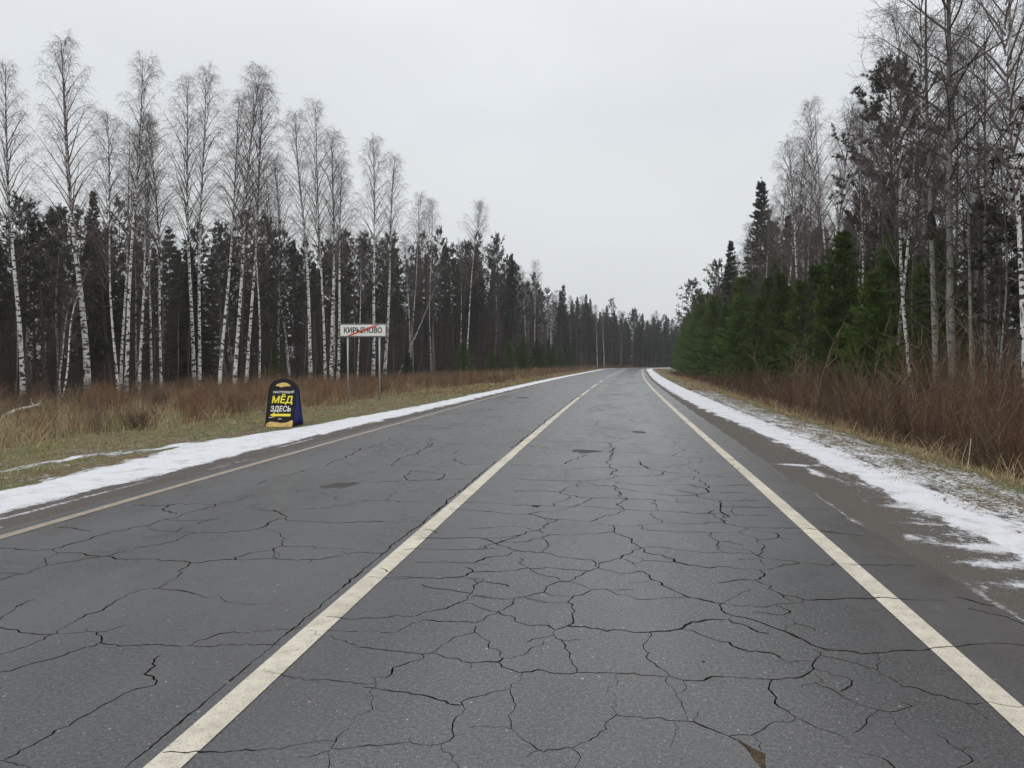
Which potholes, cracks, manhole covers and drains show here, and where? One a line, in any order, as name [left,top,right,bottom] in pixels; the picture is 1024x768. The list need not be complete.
pothole [739,740,766,768]
crack [0,392,1024,768]
